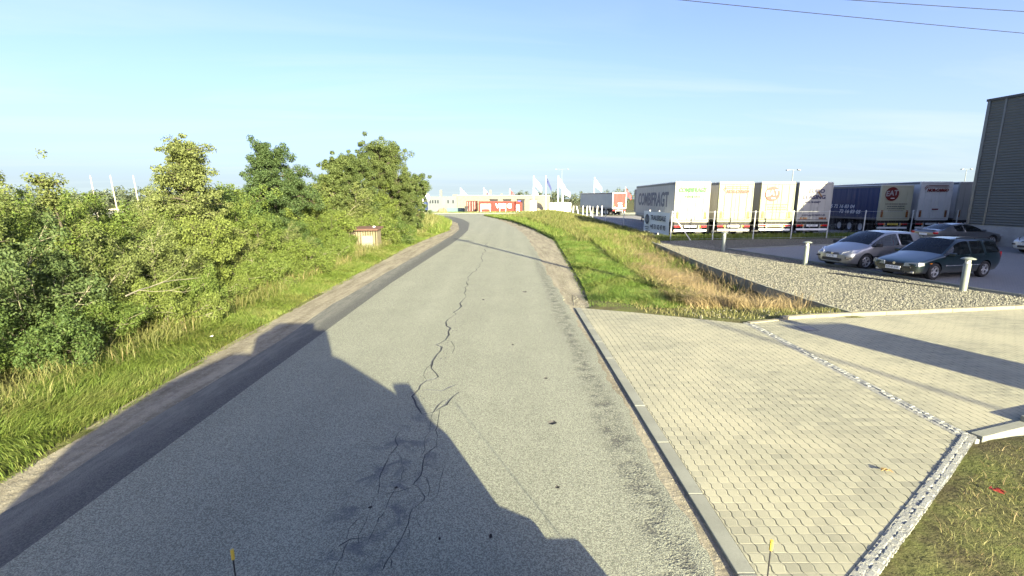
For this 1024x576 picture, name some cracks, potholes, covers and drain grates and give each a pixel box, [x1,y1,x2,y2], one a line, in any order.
crack [328,243,488,573]
